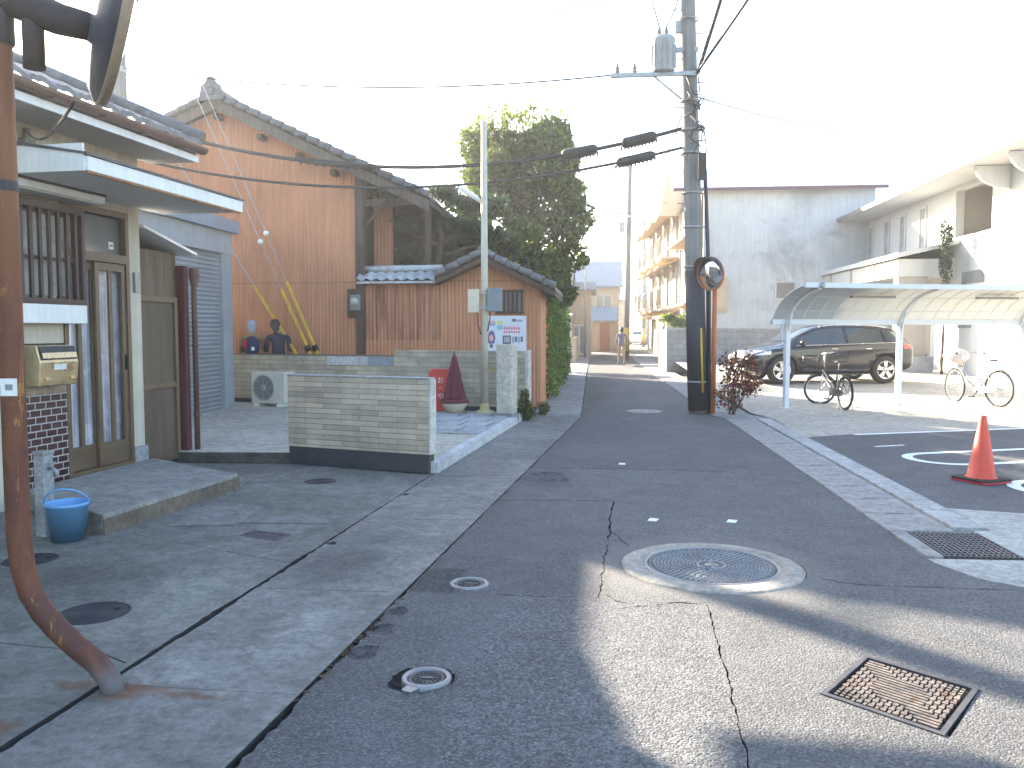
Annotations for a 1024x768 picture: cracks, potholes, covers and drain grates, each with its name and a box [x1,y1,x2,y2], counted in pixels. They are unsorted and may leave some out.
crack [818,576,996,590]
crack [606,594,750,768]
drain grate [890,531,1024,560]
manhole cover [621,543,806,595]
pothole [370,623,394,636]
pothole [388,606,408,616]
drain grate [239,530,290,541]
pothole [347,645,379,660]
